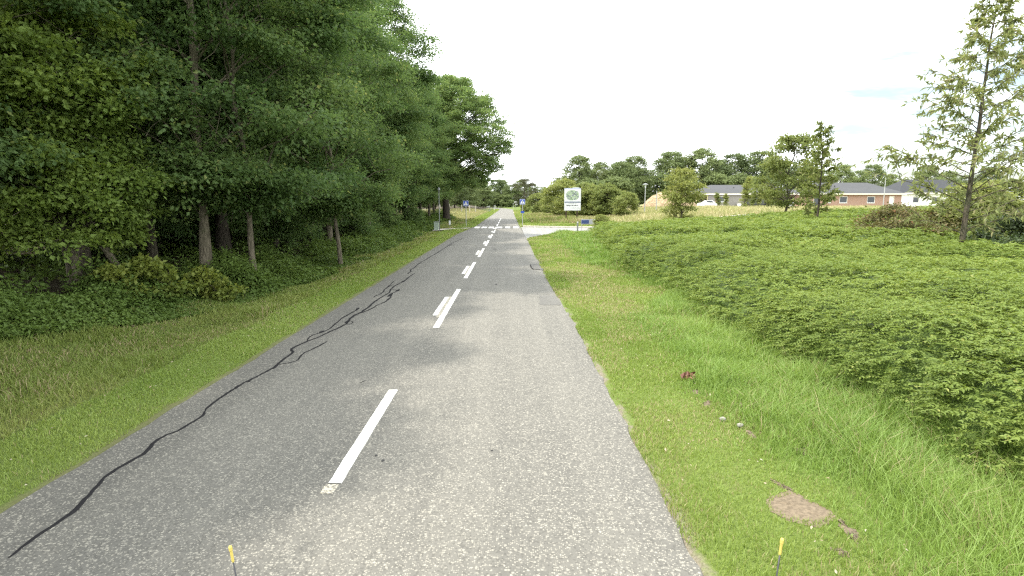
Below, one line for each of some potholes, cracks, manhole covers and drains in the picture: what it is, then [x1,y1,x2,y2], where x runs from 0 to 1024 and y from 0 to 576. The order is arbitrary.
crack [374,238,463,297]
